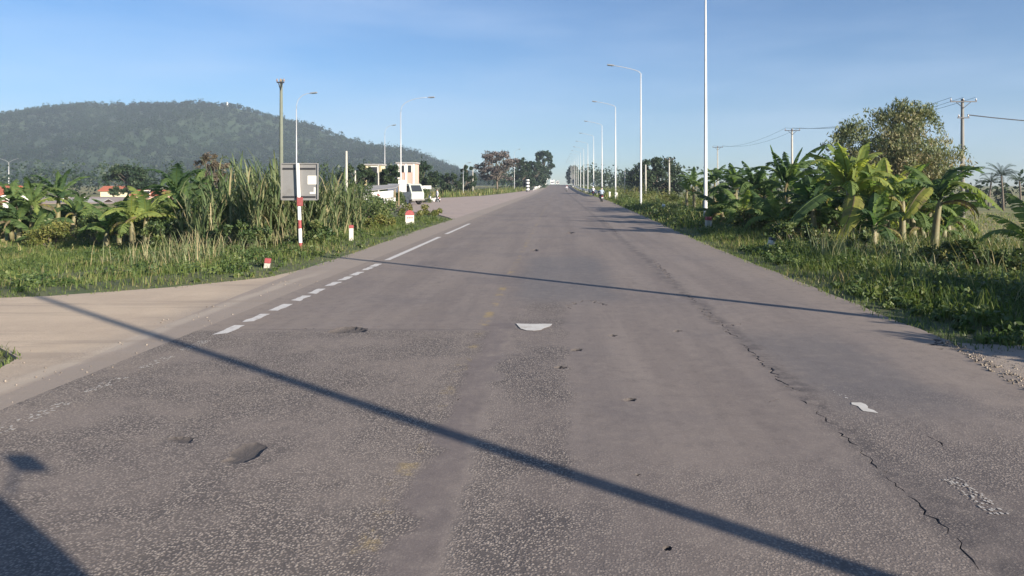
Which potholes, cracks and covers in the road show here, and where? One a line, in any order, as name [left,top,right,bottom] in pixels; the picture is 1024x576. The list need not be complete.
crack [603,218,979,569]
pothole [166,436,194,444]
pothole [328,326,368,334]
pothole [219,442,268,464]
